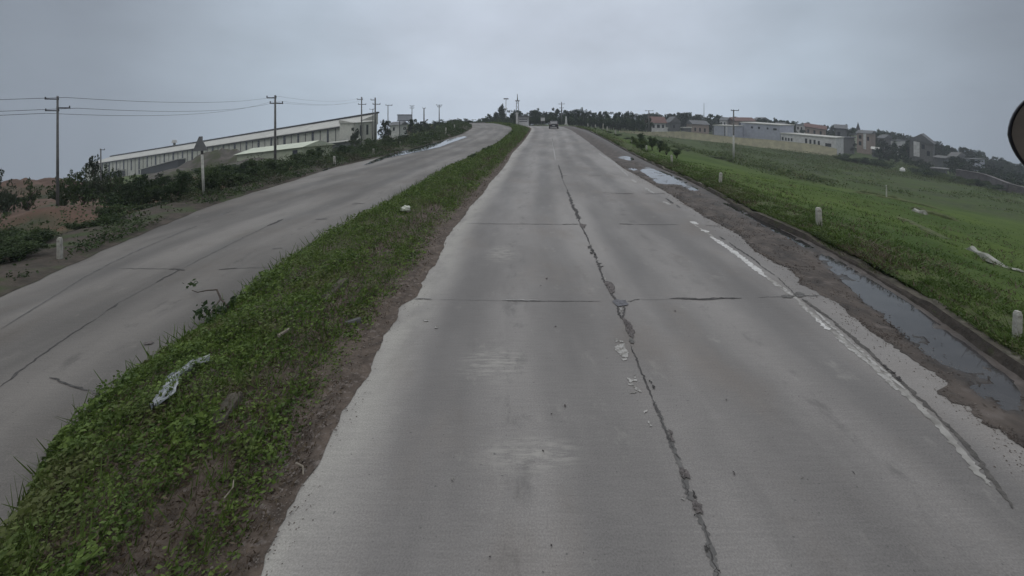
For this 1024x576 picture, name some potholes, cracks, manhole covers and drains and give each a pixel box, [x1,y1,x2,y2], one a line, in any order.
crack [630,345,719,576]
